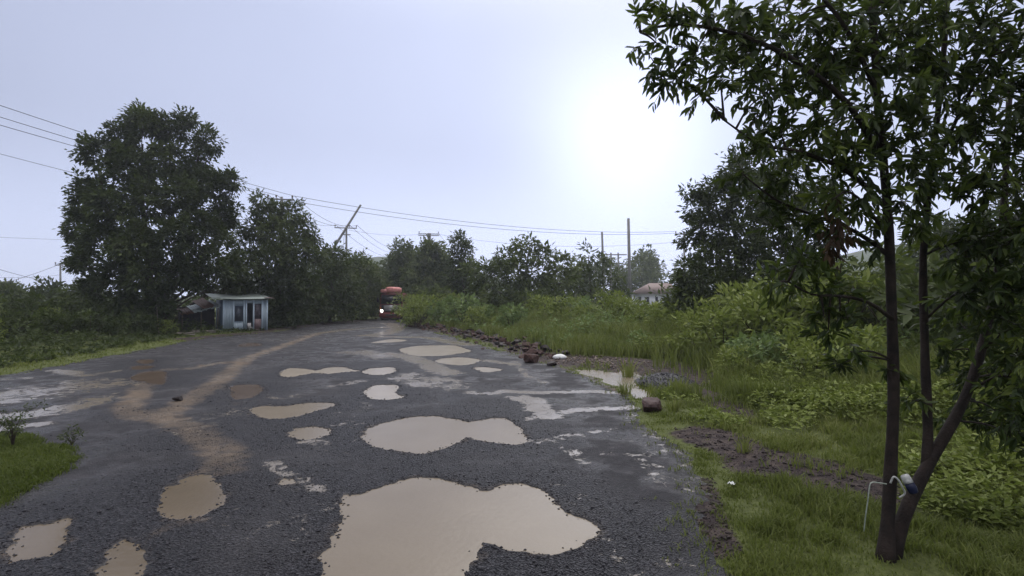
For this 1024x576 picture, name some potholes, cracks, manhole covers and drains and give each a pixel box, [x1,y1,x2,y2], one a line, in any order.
pothole [432,356,482,366]
pothole [356,414,536,455]
pothole [73,534,165,576]
pothole [125,370,171,386]
pothole [144,471,233,524]
pothole [276,366,366,377]
pothole [360,384,407,400]
pothole [0,509,92,567]
pothole [396,344,473,357]
pothole [305,474,610,576]
pothole [360,366,399,376]
pothole [225,383,268,400]
